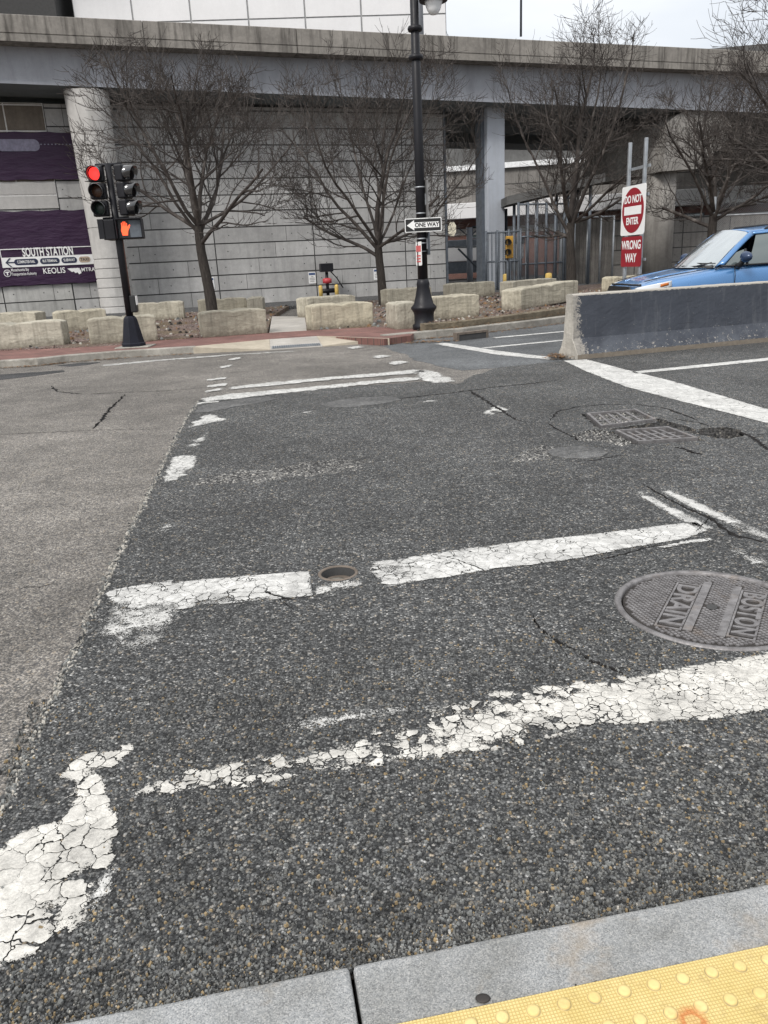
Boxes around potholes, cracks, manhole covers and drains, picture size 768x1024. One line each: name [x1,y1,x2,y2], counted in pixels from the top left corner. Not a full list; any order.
crack [739,432,768,450]
crack [1,386,193,435]
utility cover [318,565,358,581]
crack [595,484,768,561]
drain grate [586,409,656,429]
manhole cover [614,570,768,651]
crack [533,614,629,678]
drain grate [615,426,698,445]
crack [399,380,555,423]
